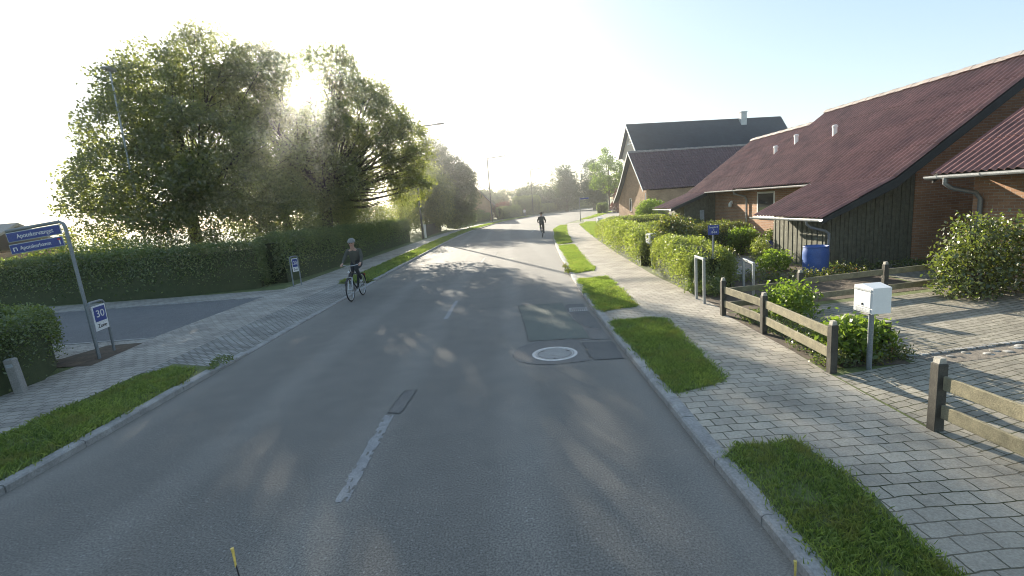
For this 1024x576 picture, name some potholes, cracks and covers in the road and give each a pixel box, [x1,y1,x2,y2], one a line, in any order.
manhole cover [532,347,577,361]
